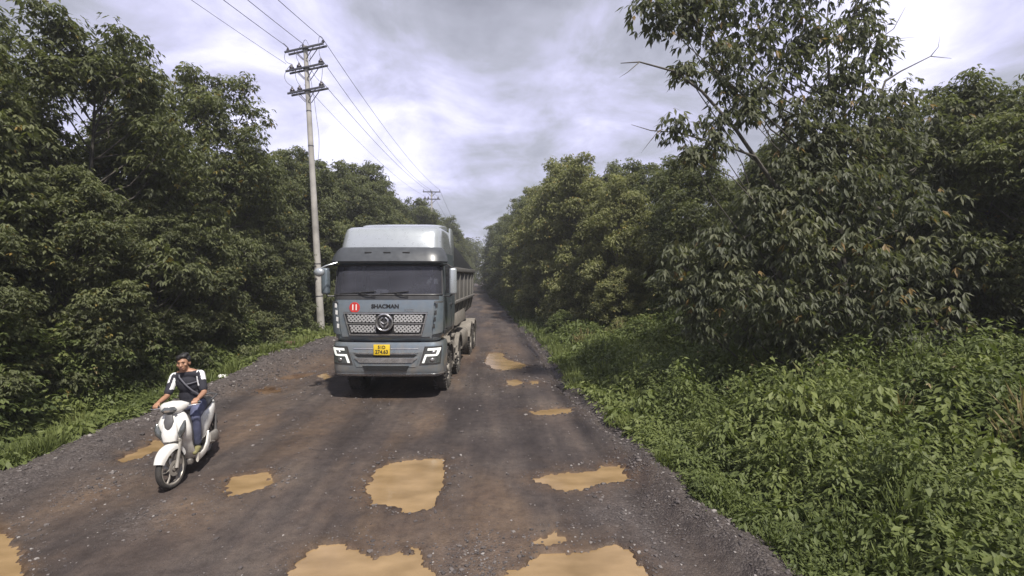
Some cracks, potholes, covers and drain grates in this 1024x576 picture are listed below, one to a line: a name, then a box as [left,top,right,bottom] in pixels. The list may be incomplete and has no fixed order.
pothole [526,405,583,416]
pothole [356,453,459,515]
pothole [212,466,289,500]
pothole [502,378,525,386]
pothole [0,515,45,576]
pothole [524,455,643,495]
pothole [109,436,164,465]
pothole [488,534,668,576]
pothole [312,371,337,380]
pothole [276,533,456,576]
pothole [481,351,531,371]
pothole [519,522,584,550]
